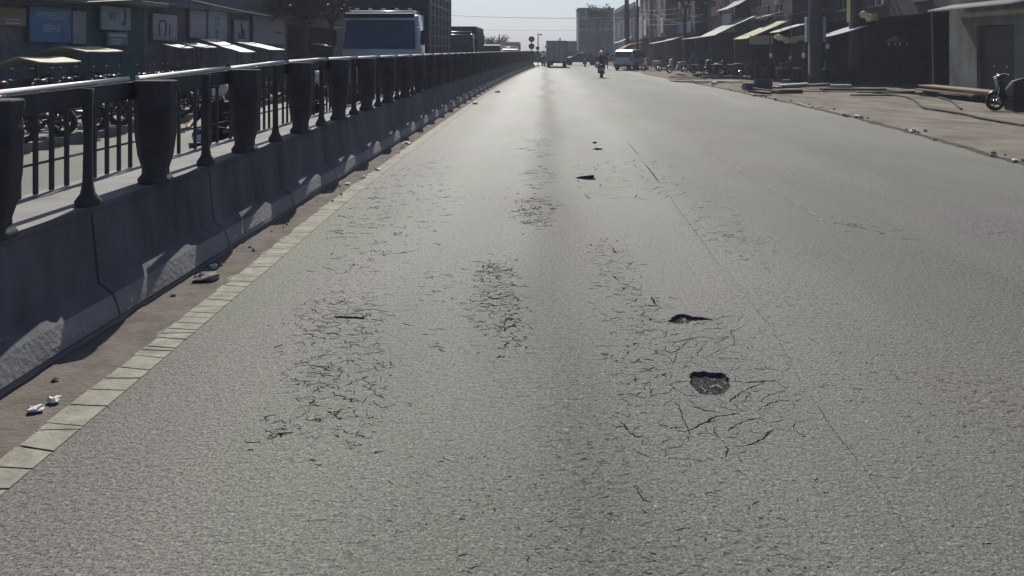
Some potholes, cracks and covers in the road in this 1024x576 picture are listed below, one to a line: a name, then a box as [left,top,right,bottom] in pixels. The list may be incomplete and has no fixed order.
crack [509,132,779,269]
pothole [668,314,713,324]
crack [407,249,536,364]
pothole [689,371,730,395]
crack [582,236,1014,571]
crack [245,290,413,466]
